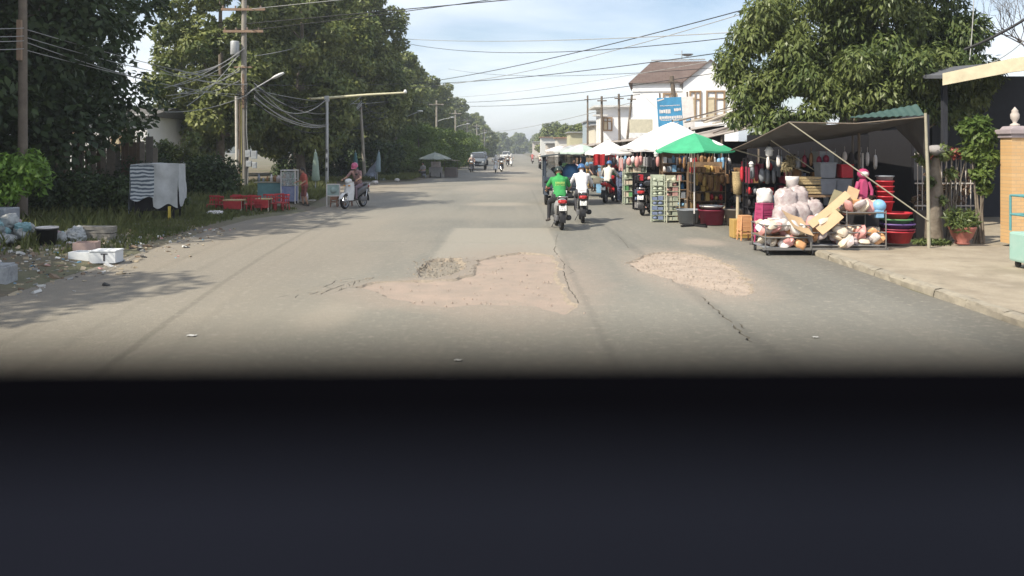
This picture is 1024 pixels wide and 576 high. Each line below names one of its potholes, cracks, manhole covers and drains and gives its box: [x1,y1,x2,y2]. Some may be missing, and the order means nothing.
crack [623,241,752,342]
pothole [355,252,587,314]
crack [553,235,579,303]
crack [281,276,380,298]
